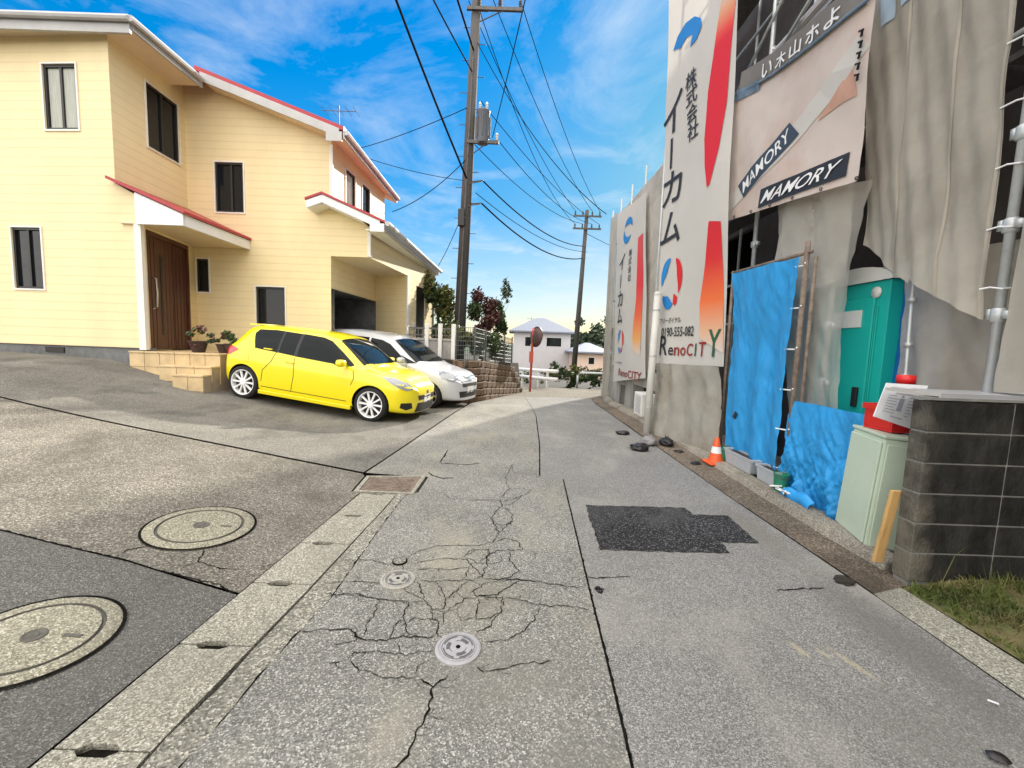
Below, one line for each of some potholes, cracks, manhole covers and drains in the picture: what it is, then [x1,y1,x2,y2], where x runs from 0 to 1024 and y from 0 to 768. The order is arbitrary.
manhole cover [0,595,127,690]
drain grate [353,476,426,499]
crack [299,465,585,768]
manhole cover [435,632,481,667]
manhole cover [380,570,416,590]
manhole cover [138,506,257,551]
